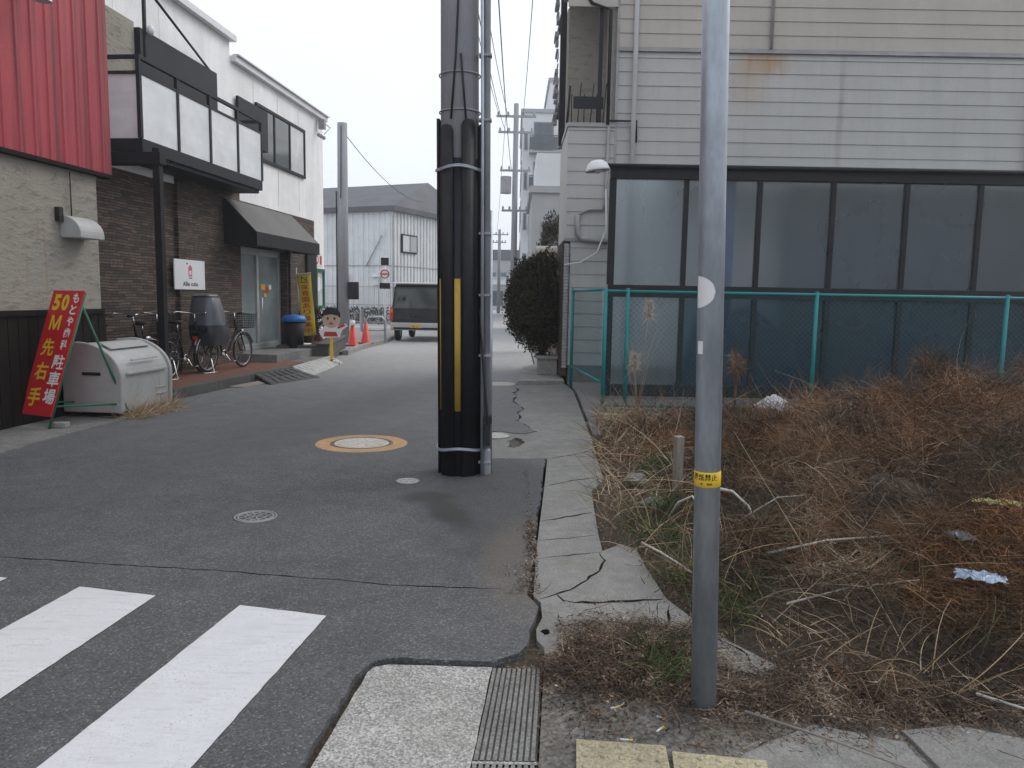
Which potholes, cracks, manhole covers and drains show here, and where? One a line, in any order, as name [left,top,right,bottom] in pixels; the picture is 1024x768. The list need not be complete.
manhole cover [315,435,407,453]
crack [538,512,671,626]
pothole [507,438,525,448]
manhole cover [234,510,278,523]
